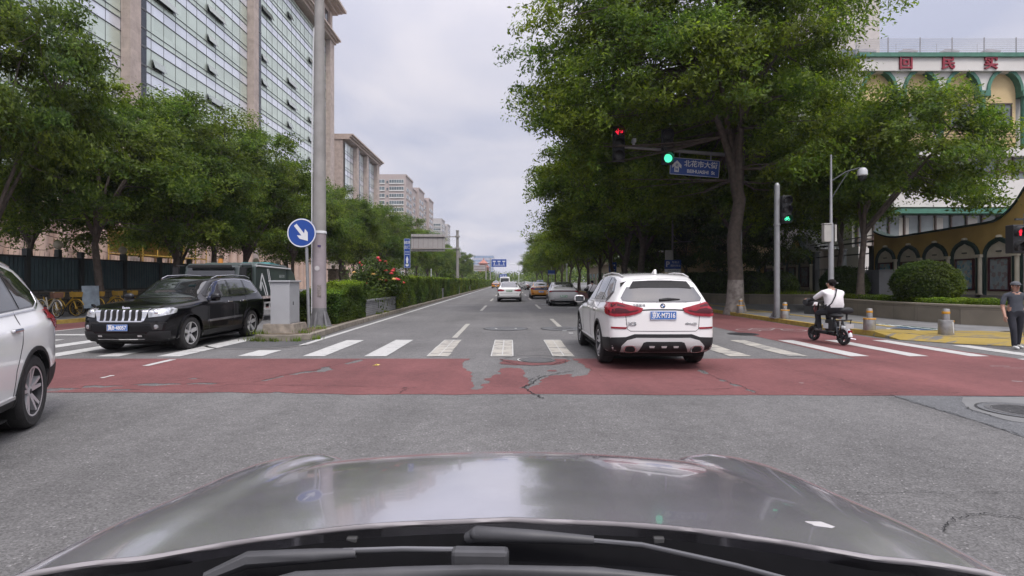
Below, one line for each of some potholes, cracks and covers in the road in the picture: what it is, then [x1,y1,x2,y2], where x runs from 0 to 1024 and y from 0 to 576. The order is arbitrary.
manhole cover [974,402,1024,417]
crack [502,359,570,398]
crack [943,512,1023,531]
manhole cover [506,355,568,363]
